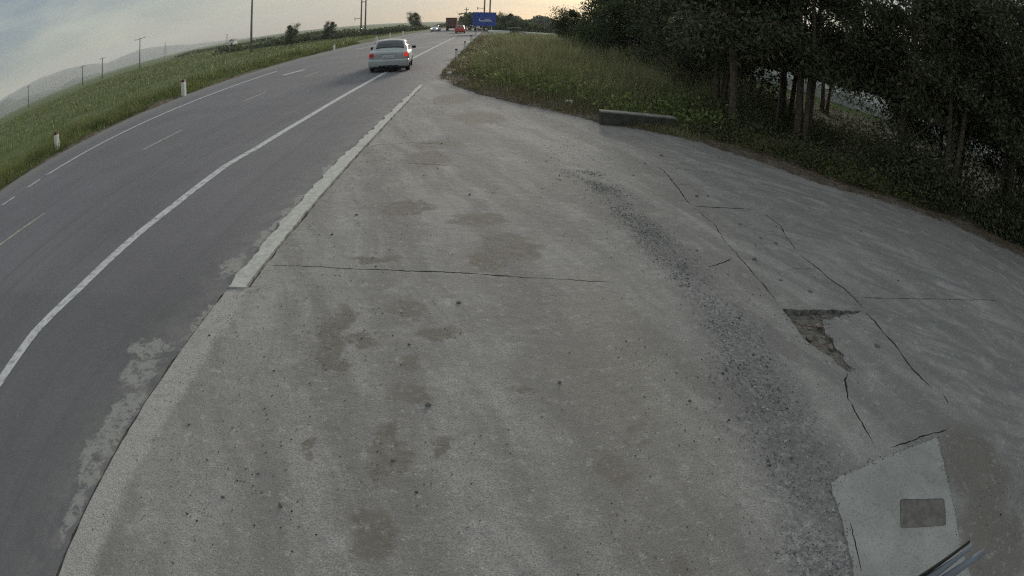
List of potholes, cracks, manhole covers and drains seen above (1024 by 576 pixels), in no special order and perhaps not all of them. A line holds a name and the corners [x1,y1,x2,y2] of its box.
manhole cover [900,499,945,528]
pothole [774,309,867,375]
crack [844,377,873,443]
crack [894,430,946,447]
crack [661,168,996,402]
